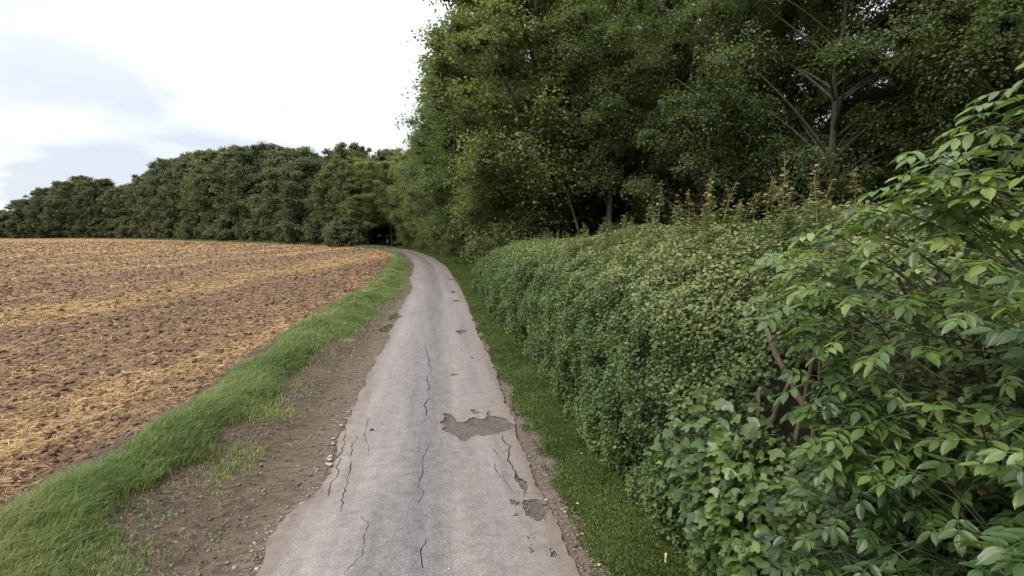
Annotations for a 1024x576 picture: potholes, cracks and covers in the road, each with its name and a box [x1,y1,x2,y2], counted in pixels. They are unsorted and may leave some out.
crack [424,347,432,416]
crack [492,435,528,501]
pothole [440,411,515,441]
crack [320,415,369,574]
pothole [522,499,551,521]
